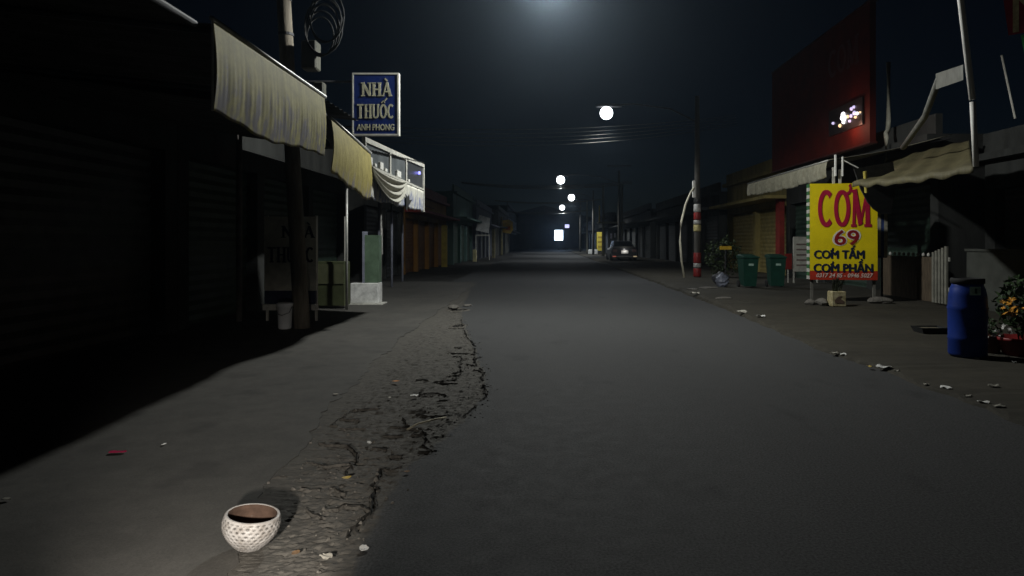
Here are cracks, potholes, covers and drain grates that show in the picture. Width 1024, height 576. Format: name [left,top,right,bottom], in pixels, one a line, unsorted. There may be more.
crack [277,320,488,538]
